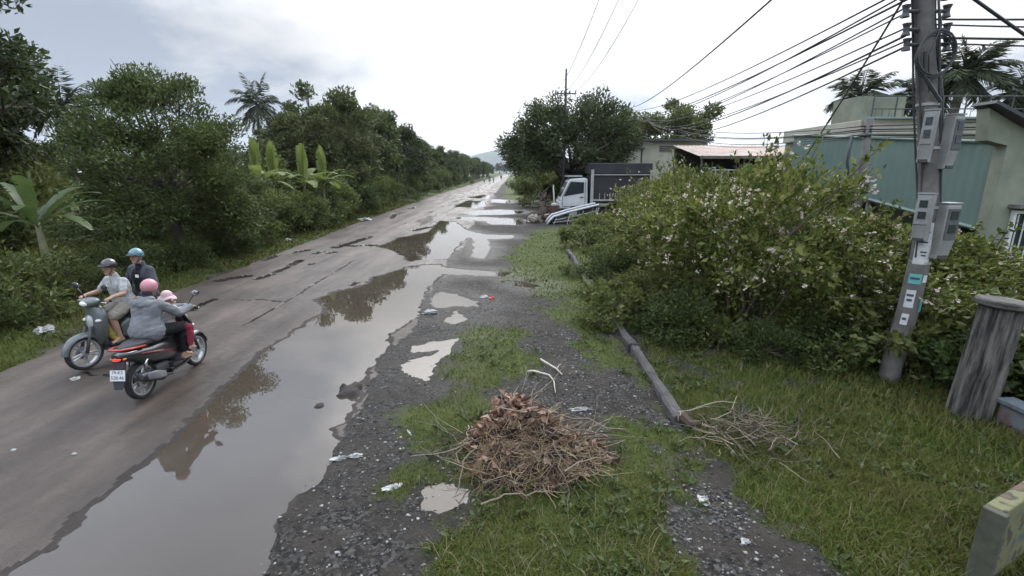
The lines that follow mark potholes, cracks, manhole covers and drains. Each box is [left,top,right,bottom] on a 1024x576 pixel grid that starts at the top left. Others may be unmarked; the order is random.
pothole [376,221,467,262]
pothole [0,264,448,576]
crack [233,260,354,326]
